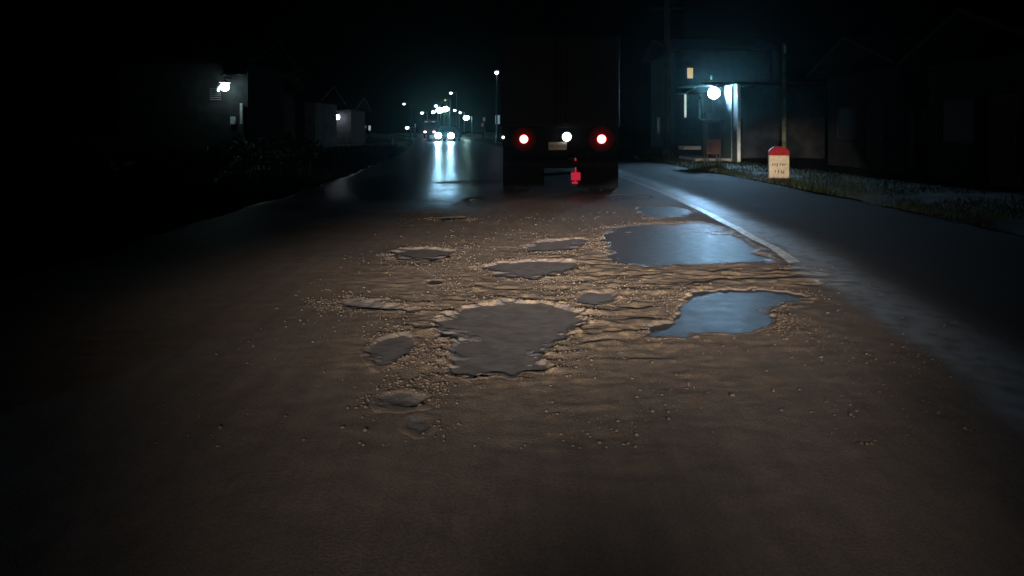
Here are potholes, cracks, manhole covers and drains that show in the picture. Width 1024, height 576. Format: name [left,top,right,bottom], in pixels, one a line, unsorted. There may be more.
pothole [630,205,696,219]
pothole [478,257,583,281]
pothole [569,289,623,306]
pothole [386,246,464,262]
pothole [358,331,423,373]
pothole [321,296,425,314]
pothole [516,237,591,252]
pothole [636,285,817,340]
pothole [369,387,436,413]
pothole [597,221,776,267]
pothole [417,297,597,383]
